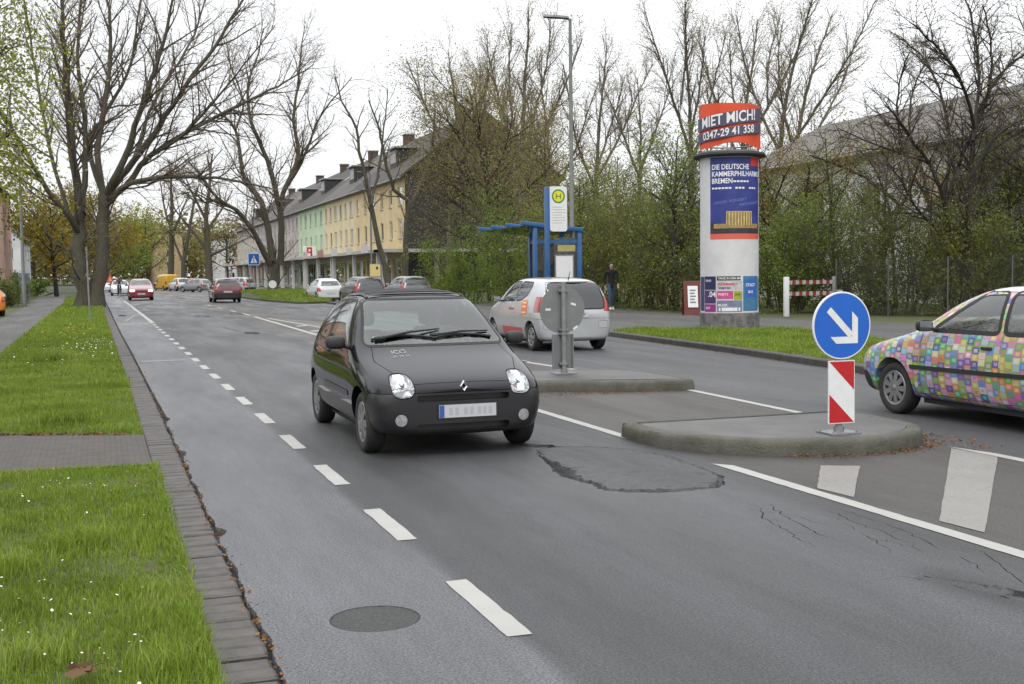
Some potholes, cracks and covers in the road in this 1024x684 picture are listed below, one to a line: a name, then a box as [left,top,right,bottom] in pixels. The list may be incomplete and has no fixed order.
crack [832,511,938,554]
crack [961,553,1023,583]
manhole cover [329,606,421,632]
crack [745,504,833,547]
